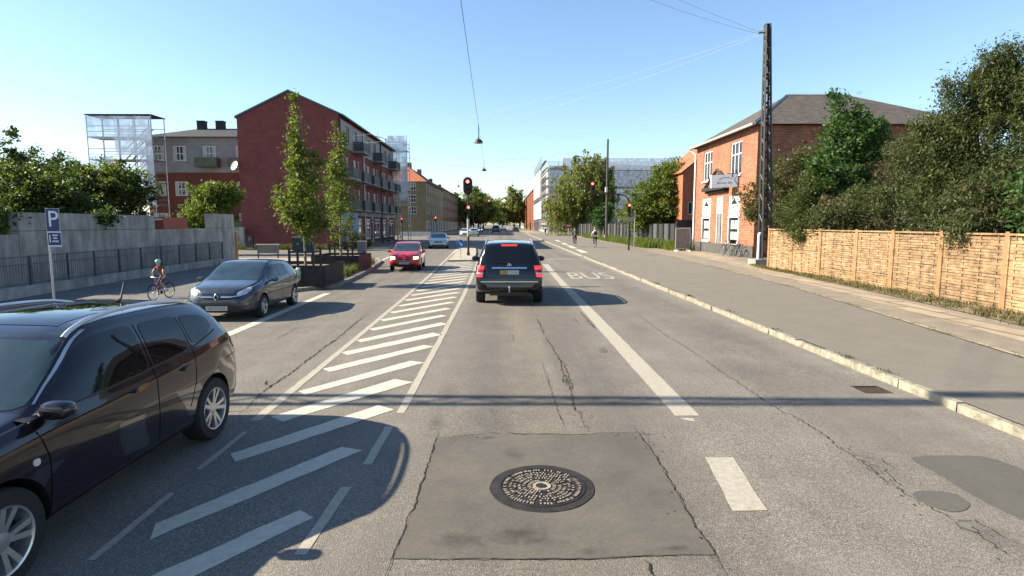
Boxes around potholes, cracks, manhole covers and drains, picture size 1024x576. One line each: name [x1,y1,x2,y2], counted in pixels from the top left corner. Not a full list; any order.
manhole cover [489,465,595,513]
crack [241,316,364,411]
crack [636,313,1023,564]
crack [385,315,734,576]
